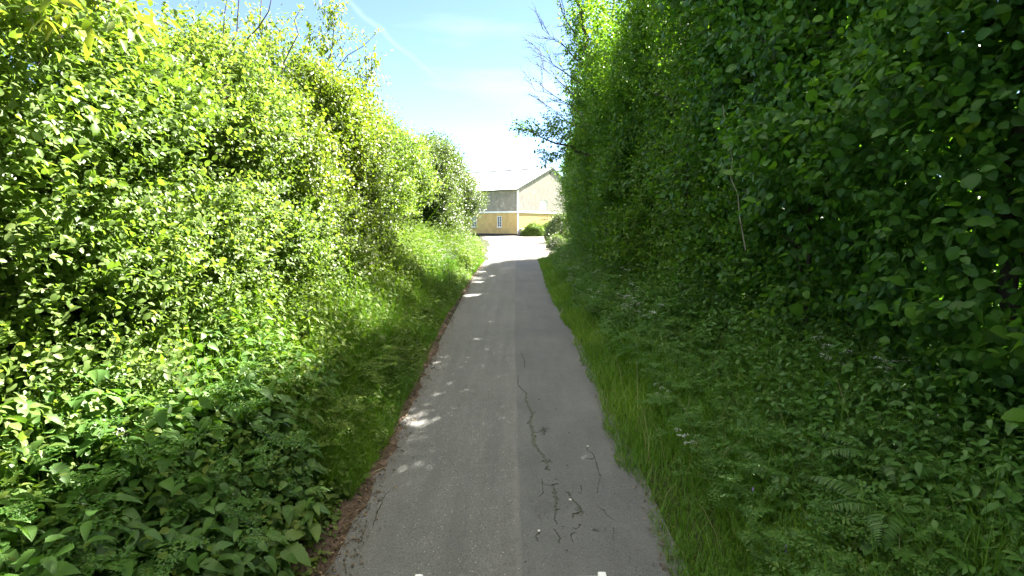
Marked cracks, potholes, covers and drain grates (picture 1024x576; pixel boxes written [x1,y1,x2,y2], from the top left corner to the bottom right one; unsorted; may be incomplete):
crack [517,352,615,544]
crack [353,487,394,542]
